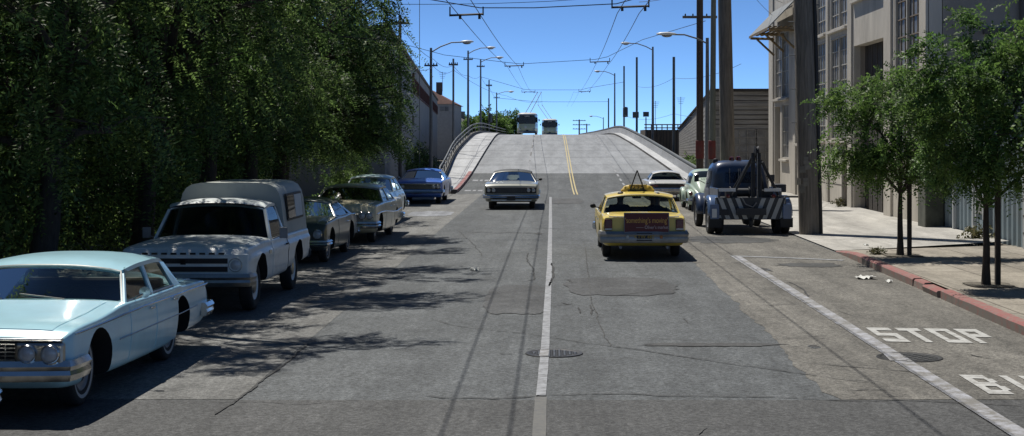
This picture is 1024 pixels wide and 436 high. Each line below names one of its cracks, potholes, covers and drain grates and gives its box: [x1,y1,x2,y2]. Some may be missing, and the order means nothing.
manhole cover [876,352,943,362]
manhole cover [525,349,583,358]
